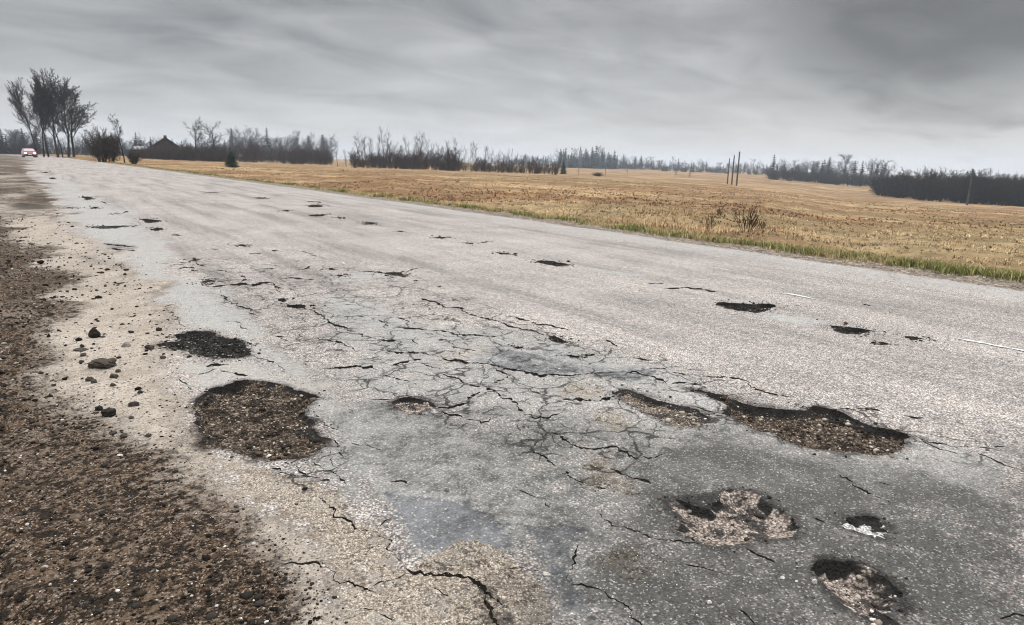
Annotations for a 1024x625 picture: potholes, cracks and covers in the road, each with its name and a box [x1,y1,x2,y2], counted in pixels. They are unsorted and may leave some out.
pothole [668,489,800,547]
pothole [689,389,910,455]
crack [913,438,1024,469]
crack [276,267,793,489]
pothole [842,515,889,539]
crack [840,475,897,503]
crack [180,249,336,329]
crack [600,509,700,544]
pothole [811,558,904,625]
crack [272,406,541,625]
pothole [830,325,879,334]
